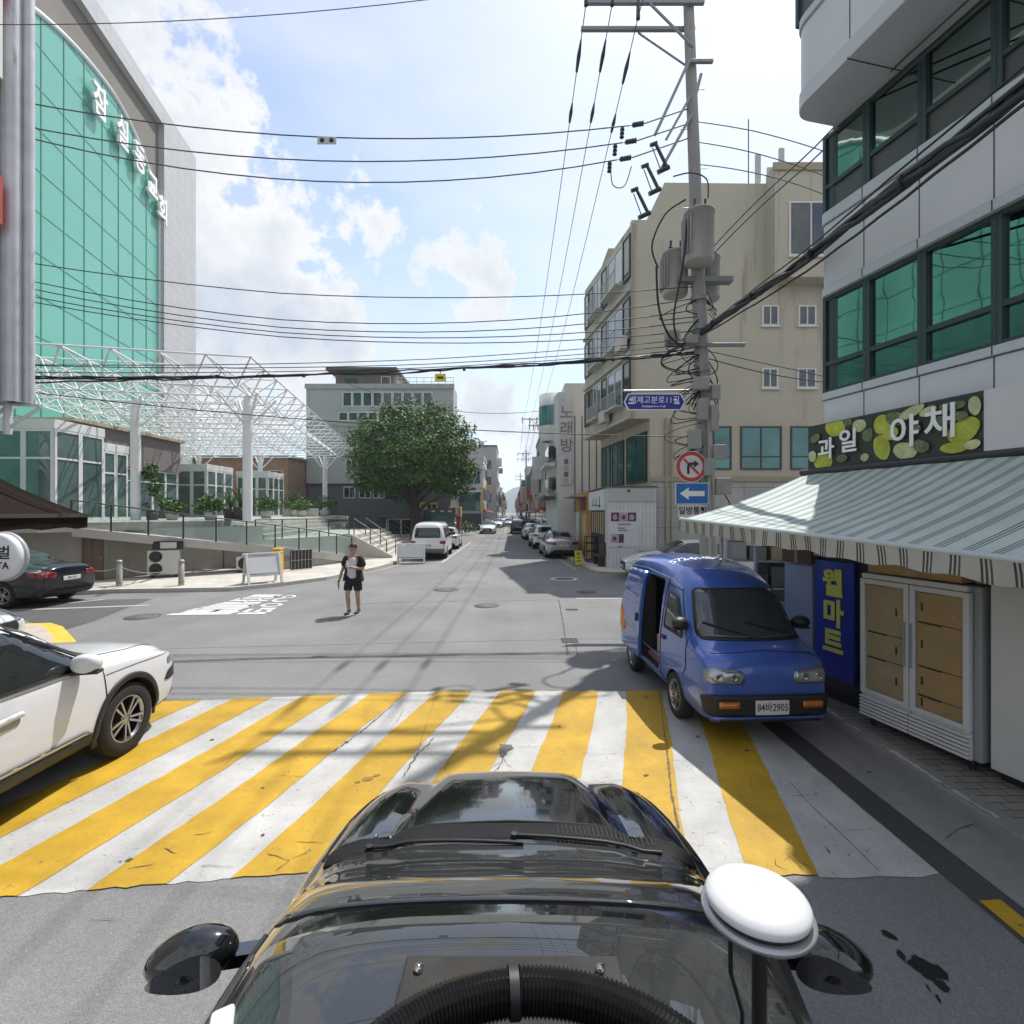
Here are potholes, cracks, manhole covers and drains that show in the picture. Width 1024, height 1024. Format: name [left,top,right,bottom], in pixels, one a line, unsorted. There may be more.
crack [404,705,477,775]
